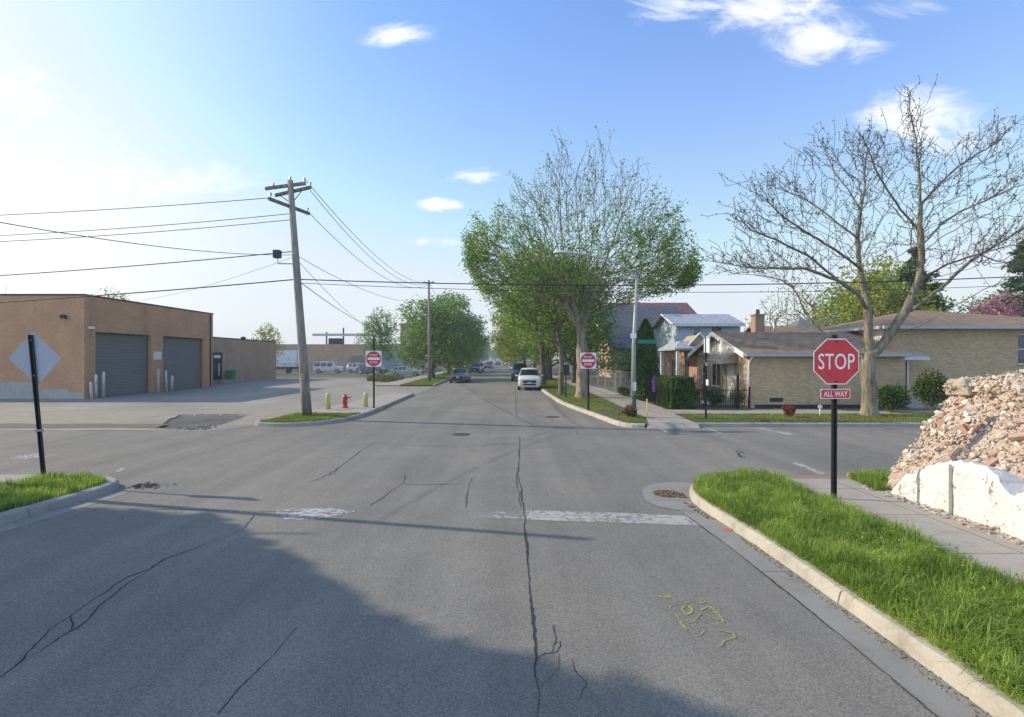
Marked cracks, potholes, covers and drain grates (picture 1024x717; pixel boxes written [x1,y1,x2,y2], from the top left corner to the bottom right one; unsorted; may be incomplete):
crack [218,635,290,713]
crack [371,475,438,505]
manhole cover [653,490,681,498]
crack [0,509,295,677]
crack [516,431,587,717]
crack [309,443,495,483]
